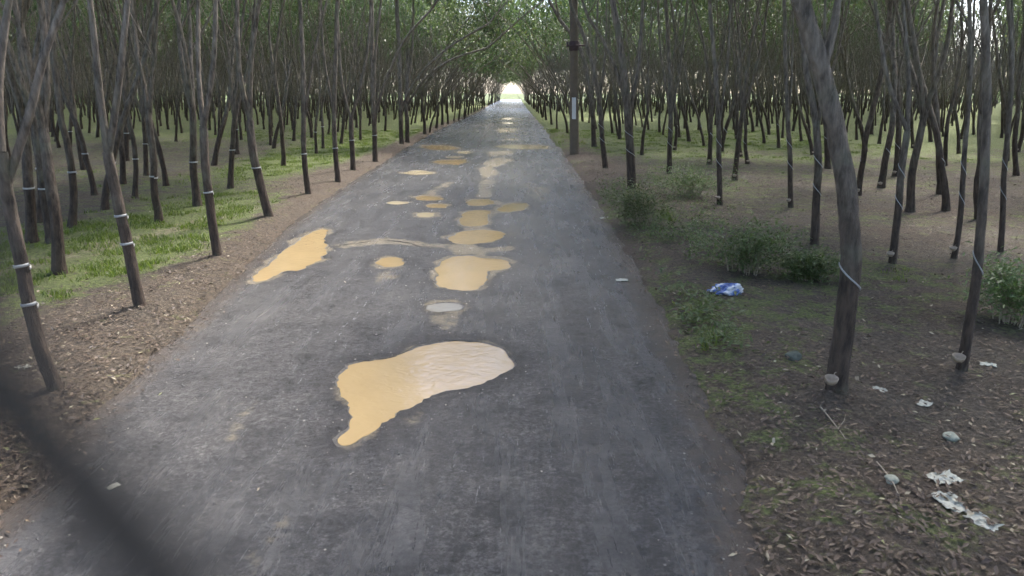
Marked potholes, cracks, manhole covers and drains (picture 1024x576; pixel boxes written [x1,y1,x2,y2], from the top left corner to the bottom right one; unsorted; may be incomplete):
pothole [496,203,530,212]
pothole [426,302,466,312]
pothole [251,229,329,282]
pothole [432,255,511,291]
pothole [374,257,406,267]
pothole [457,209,492,227]
pothole [445,229,506,245]
pothole [332,340,517,447]
